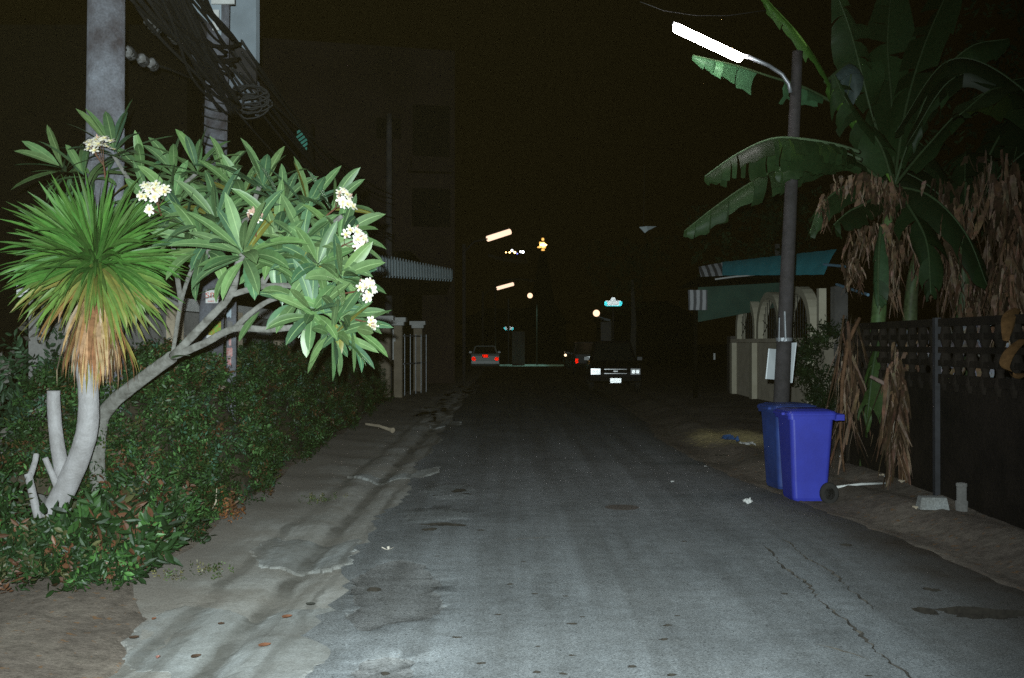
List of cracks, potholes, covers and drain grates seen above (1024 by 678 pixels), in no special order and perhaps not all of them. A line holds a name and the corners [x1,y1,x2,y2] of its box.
crack [763,538,912,678]
